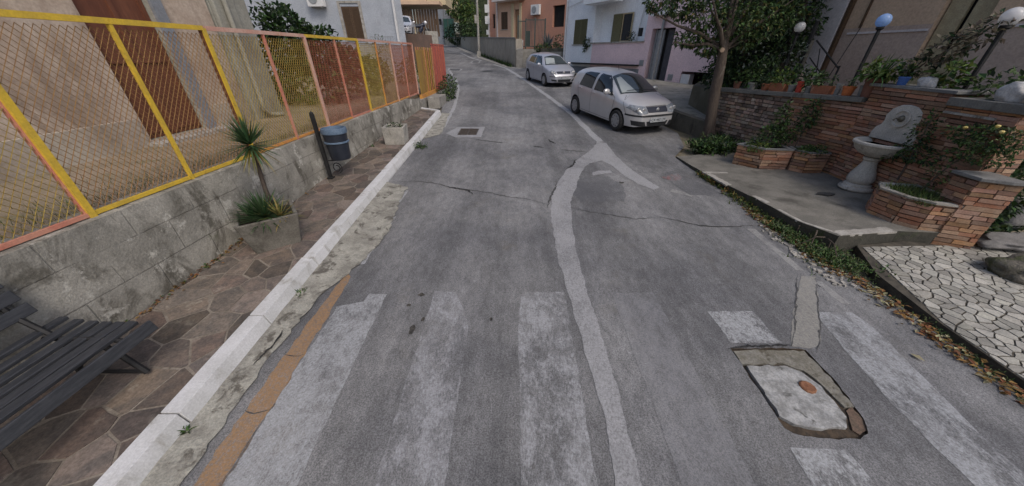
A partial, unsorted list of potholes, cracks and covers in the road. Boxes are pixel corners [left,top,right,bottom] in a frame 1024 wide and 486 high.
crack [254,332,301,363]
crack [401,139,753,227]
drain grate [446,127,485,137]
